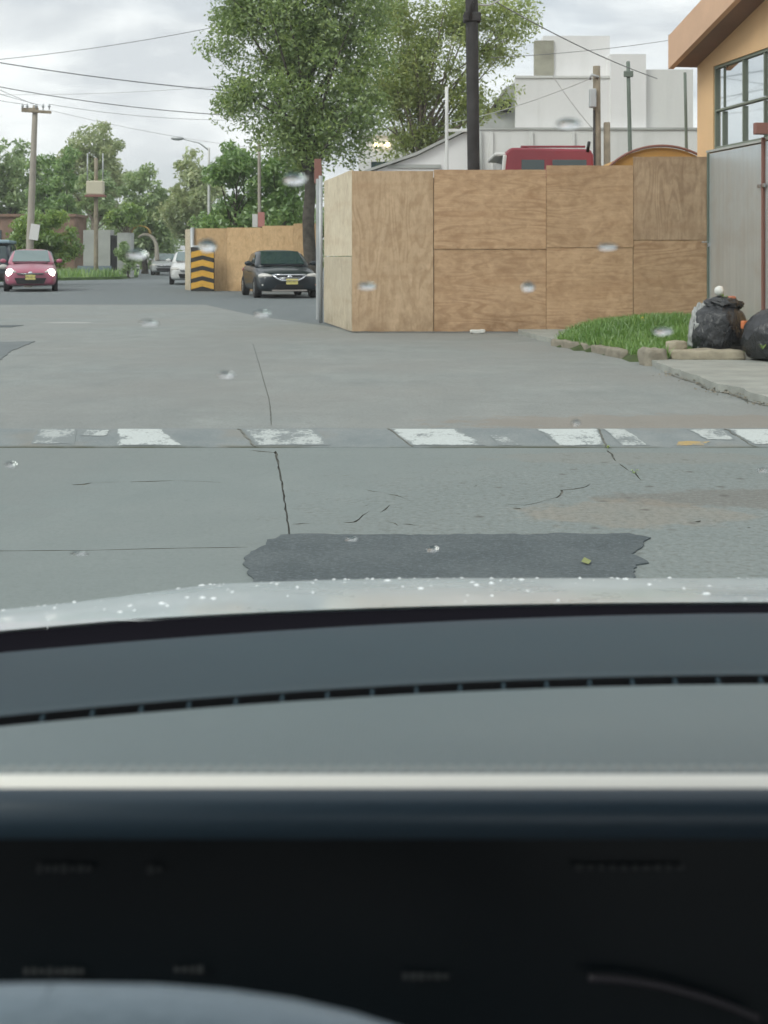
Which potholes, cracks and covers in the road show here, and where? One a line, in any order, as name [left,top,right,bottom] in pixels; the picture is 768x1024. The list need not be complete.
crack [300,490,419,526]
crack [476,484,590,509]
crack [597,428,641,480]
